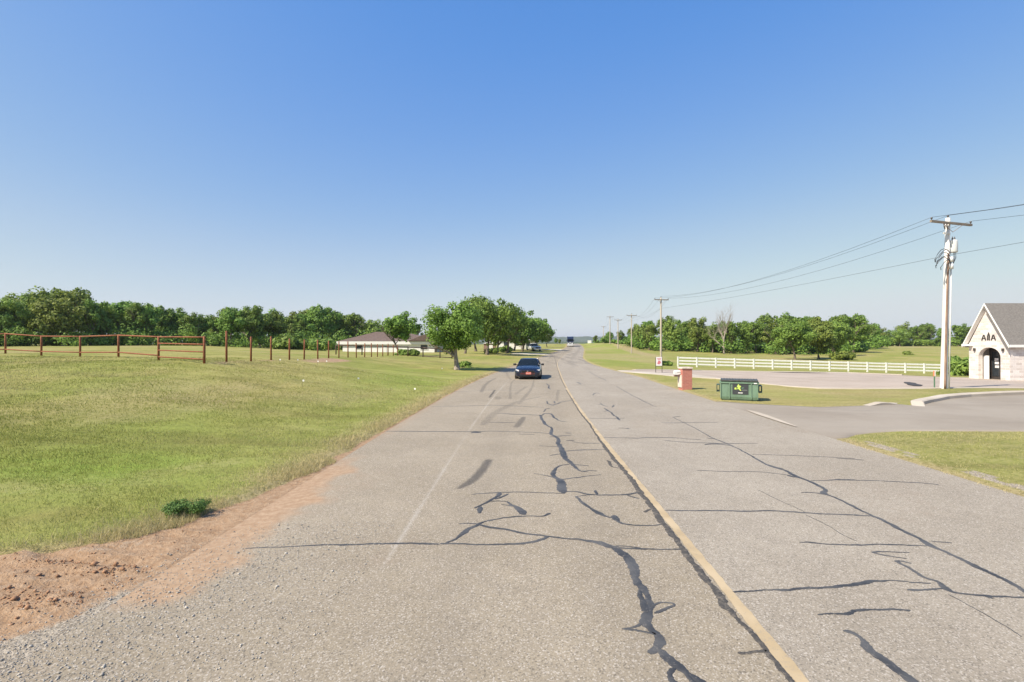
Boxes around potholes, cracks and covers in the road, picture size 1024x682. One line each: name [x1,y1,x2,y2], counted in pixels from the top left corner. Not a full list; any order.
crack [245,357,1024,682]
